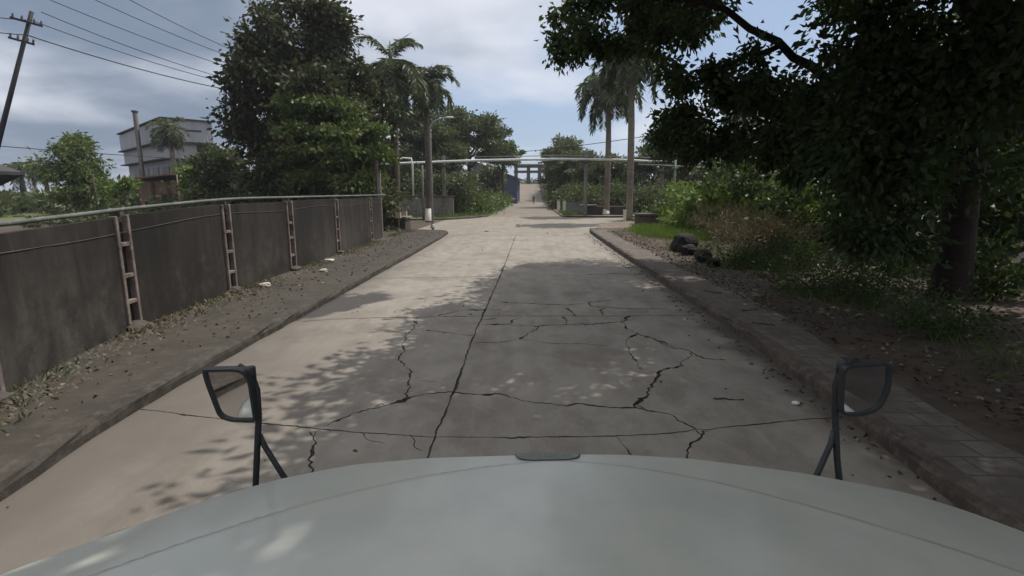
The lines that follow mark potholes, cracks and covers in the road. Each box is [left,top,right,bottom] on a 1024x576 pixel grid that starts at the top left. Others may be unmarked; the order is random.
crack [307,300,721,473]
